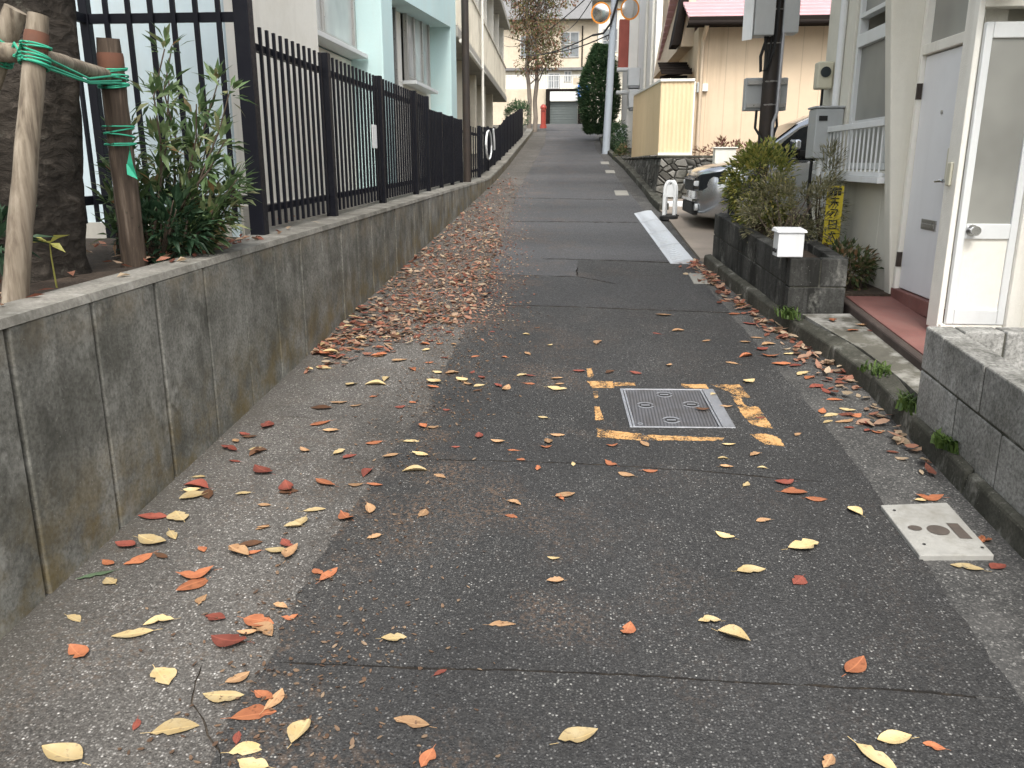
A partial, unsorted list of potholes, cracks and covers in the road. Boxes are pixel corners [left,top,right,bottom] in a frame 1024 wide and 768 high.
crack [191,666,221,763]
utility cover [881,503,994,561]
manhole cover [620,388,736,428]
